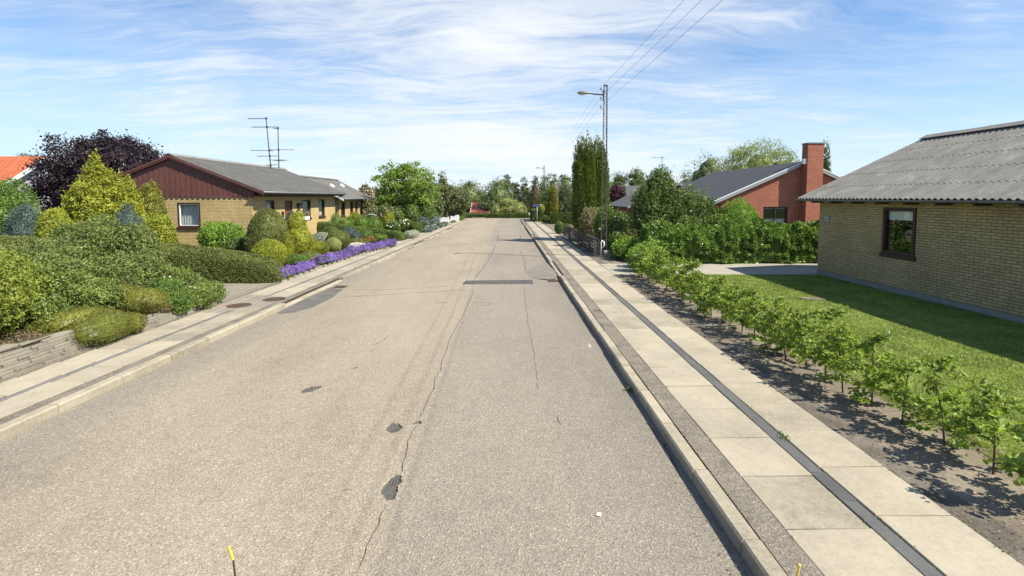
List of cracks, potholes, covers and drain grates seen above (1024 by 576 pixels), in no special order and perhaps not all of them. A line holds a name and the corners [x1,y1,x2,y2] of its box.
pothole [381,474,403,500]
crack [337,225,538,568]
pothole [385,422,404,433]
